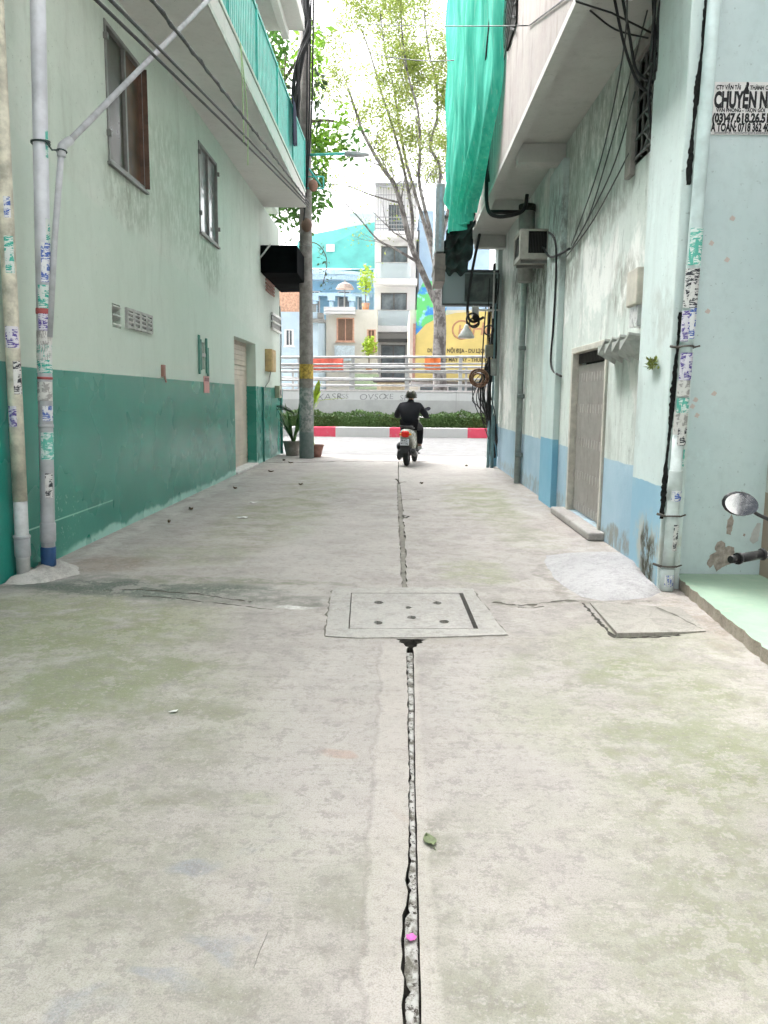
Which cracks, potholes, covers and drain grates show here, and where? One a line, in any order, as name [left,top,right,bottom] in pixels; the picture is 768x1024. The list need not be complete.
manhole cover [323,587,508,640]
crack [103,589,272,610]
crack [265,461,420,587]
crack [492,600,578,608]
manhole cover [582,602,706,639]
